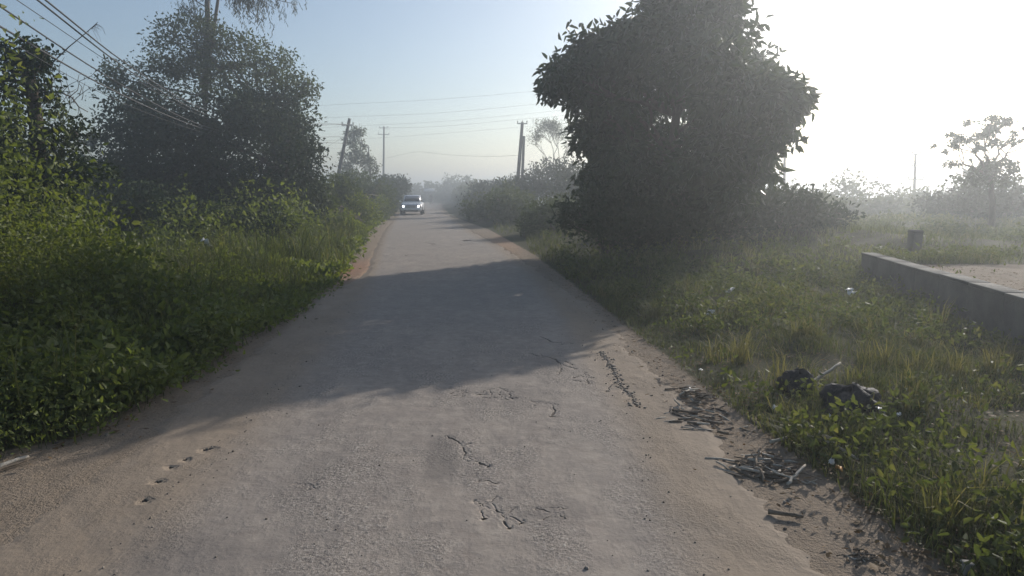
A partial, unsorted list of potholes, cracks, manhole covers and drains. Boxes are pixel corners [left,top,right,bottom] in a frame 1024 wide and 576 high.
crack [450,337,647,417]
crack [444,436,567,530]
